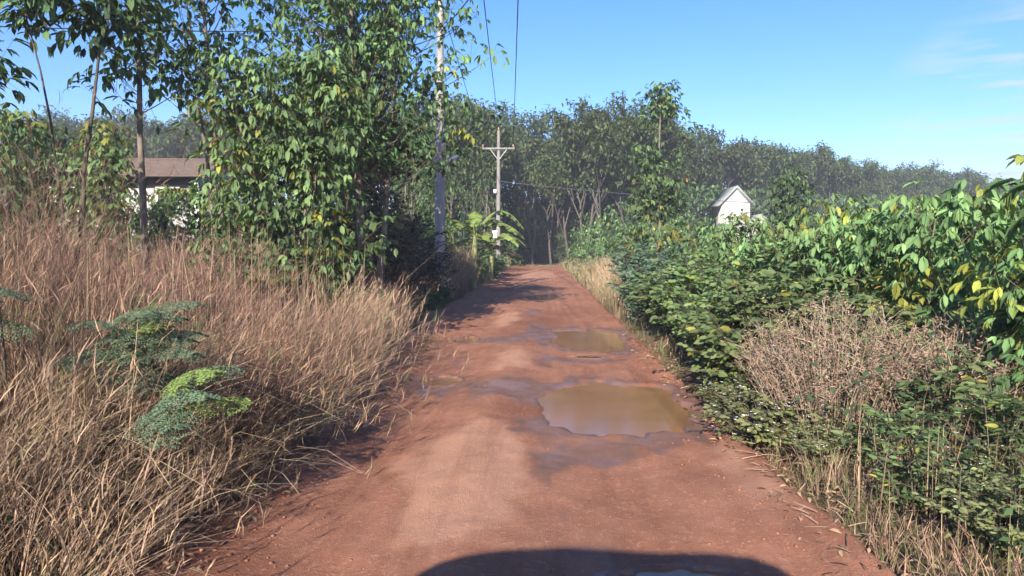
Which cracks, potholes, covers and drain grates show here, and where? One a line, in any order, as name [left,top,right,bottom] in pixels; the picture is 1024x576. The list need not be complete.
pothole [523,377,717,447]
pothole [543,327,637,358]
pothole [452,336,481,345]
pothole [524,292,564,301]
pothole [417,375,466,388]
